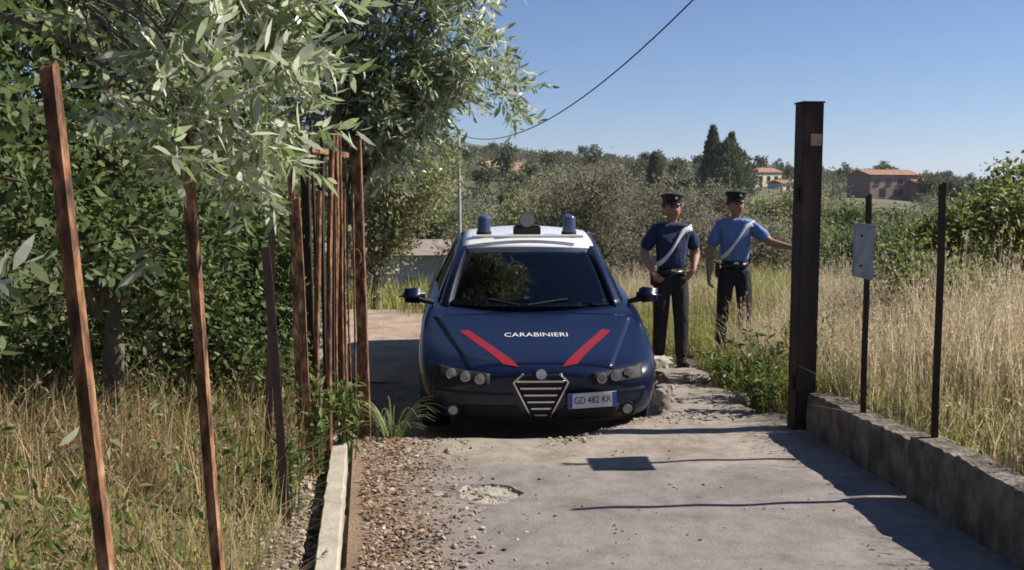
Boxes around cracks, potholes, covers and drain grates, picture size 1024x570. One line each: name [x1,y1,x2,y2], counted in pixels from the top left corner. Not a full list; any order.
pothole [455,483,529,506]
